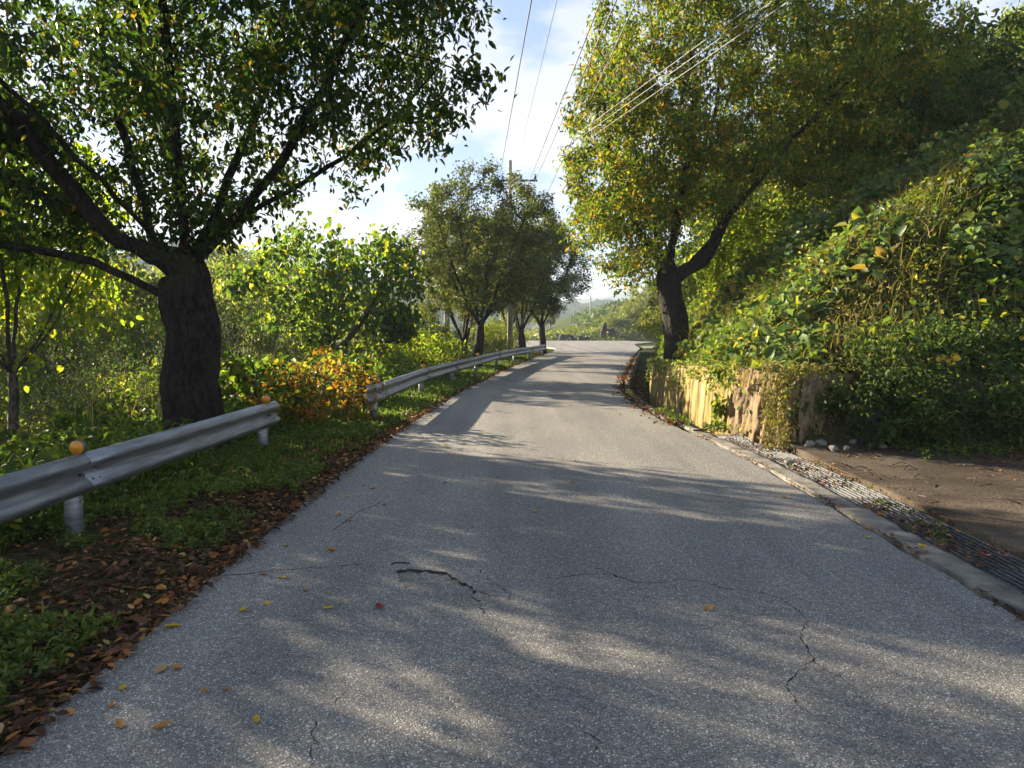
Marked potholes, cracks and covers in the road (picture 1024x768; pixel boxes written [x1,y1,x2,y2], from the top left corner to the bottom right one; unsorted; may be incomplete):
drain grate [903,528,1024,572]
drain grate [804,476,889,499]
drain grate [982,569,1024,594]
crack [551,567,857,732]
drain grate [773,459,841,477]
crack [309,714,318,768]
drain grate [847,497,952,530]
drain grate [739,445,802,460]
drain grate [715,434,760,446]
